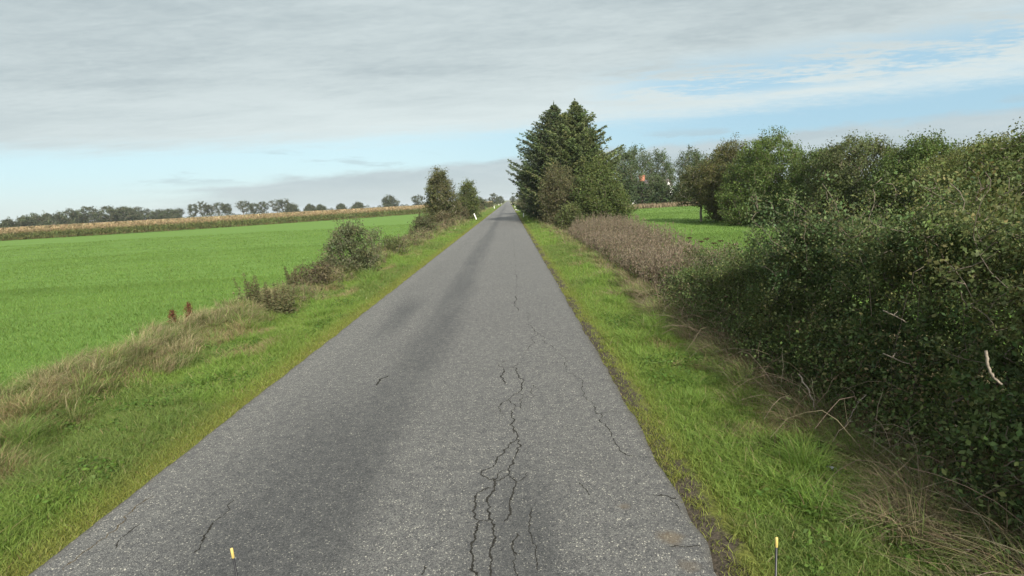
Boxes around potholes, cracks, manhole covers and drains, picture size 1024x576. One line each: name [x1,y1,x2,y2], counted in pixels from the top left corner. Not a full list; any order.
crack [538,333,640,457]
crack [63,498,149,571]
crack [193,500,234,553]
crack [468,315,538,576]
